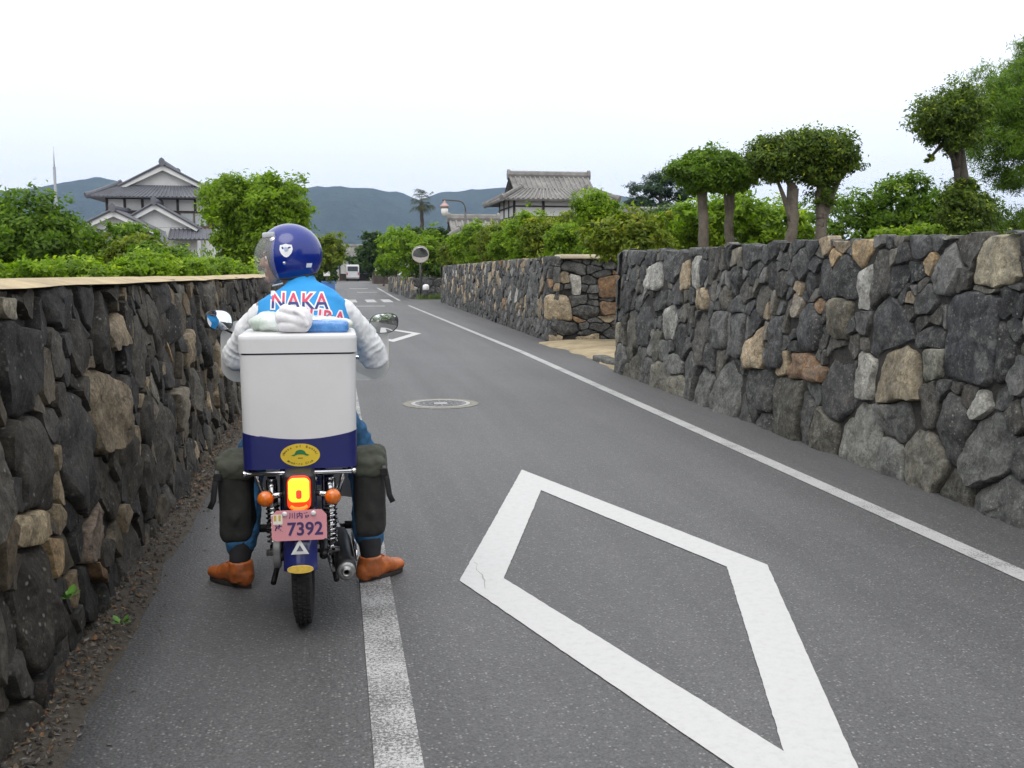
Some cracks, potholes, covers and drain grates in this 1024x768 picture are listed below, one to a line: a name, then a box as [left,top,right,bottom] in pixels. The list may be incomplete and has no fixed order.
manhole cover [403,399,479,409]
